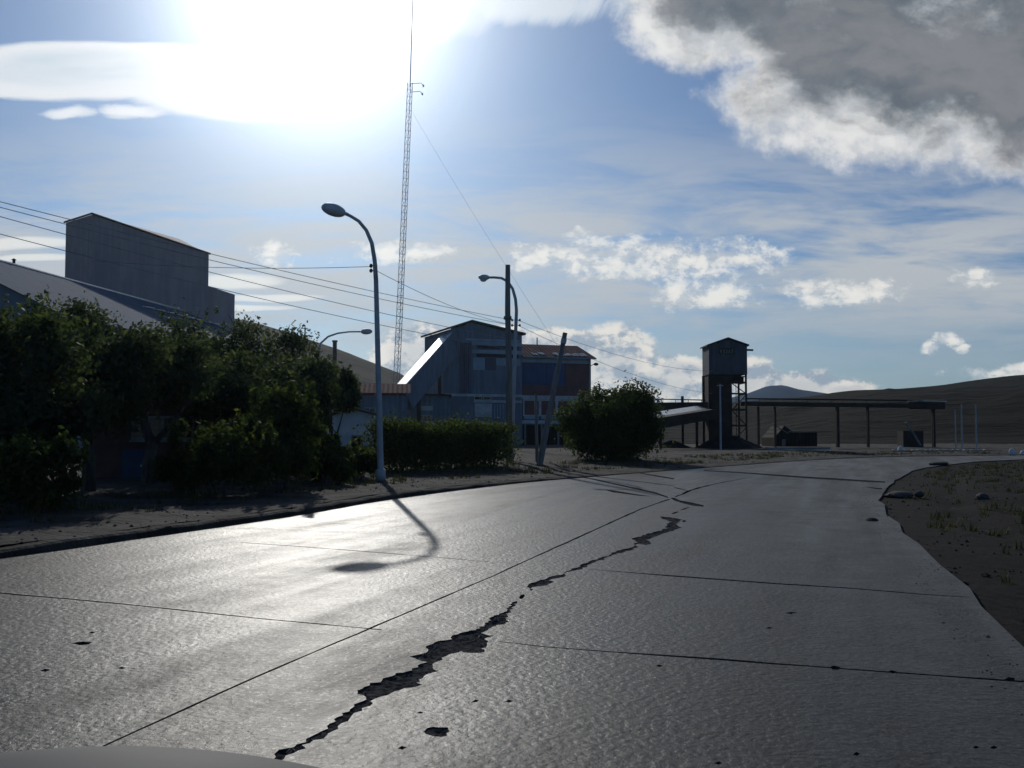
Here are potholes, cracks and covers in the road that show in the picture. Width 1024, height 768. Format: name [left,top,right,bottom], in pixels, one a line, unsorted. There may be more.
pothole [424,727,449,737]
crack [274,470,885,760]
